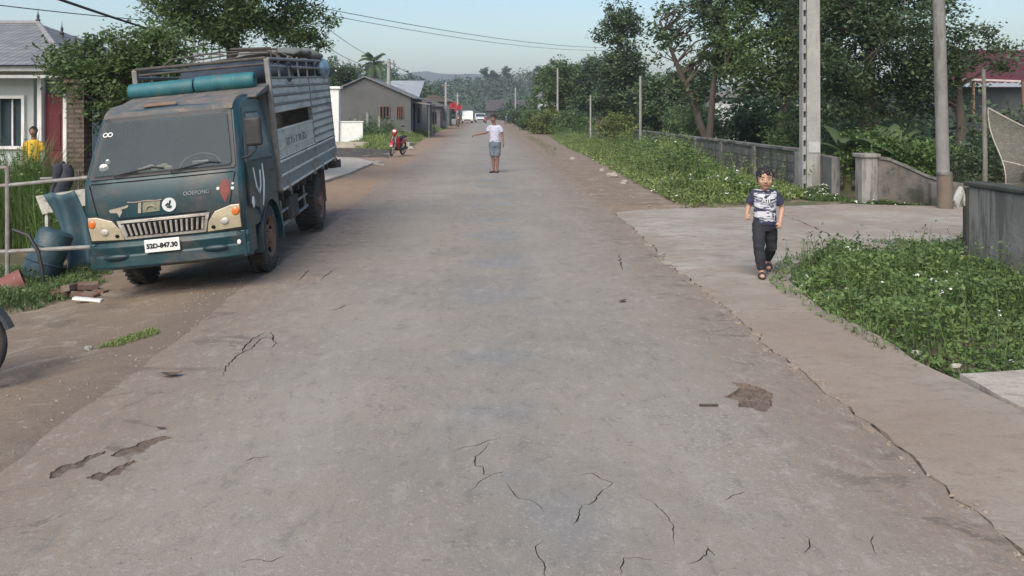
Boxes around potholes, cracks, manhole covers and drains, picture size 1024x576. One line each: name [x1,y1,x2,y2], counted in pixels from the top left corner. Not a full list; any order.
crack [574,473,613,524]
pothole [111,436,173,457]
pothole [725,382,773,412]
pothole [49,451,106,479]
crack [223,332,277,375]
crack [460,439,544,512]
pothole [86,460,138,481]
